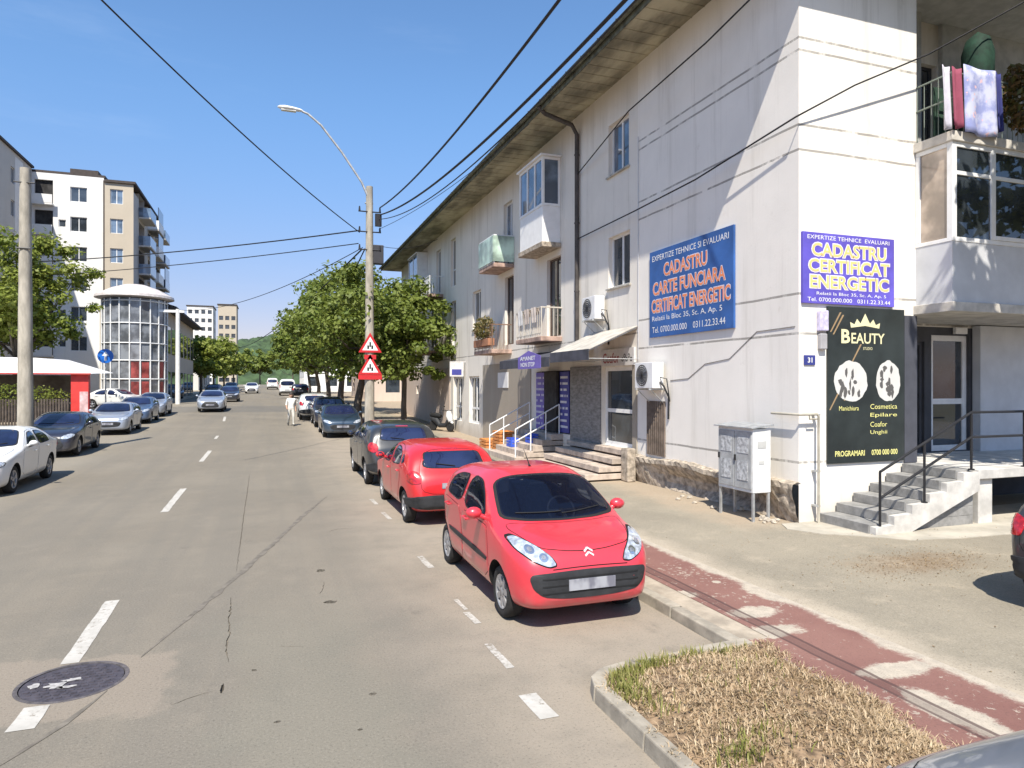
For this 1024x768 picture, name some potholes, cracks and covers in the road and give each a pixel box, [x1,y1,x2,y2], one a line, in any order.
manhole cover [12,661,130,704]
crack [236,475,250,570]
